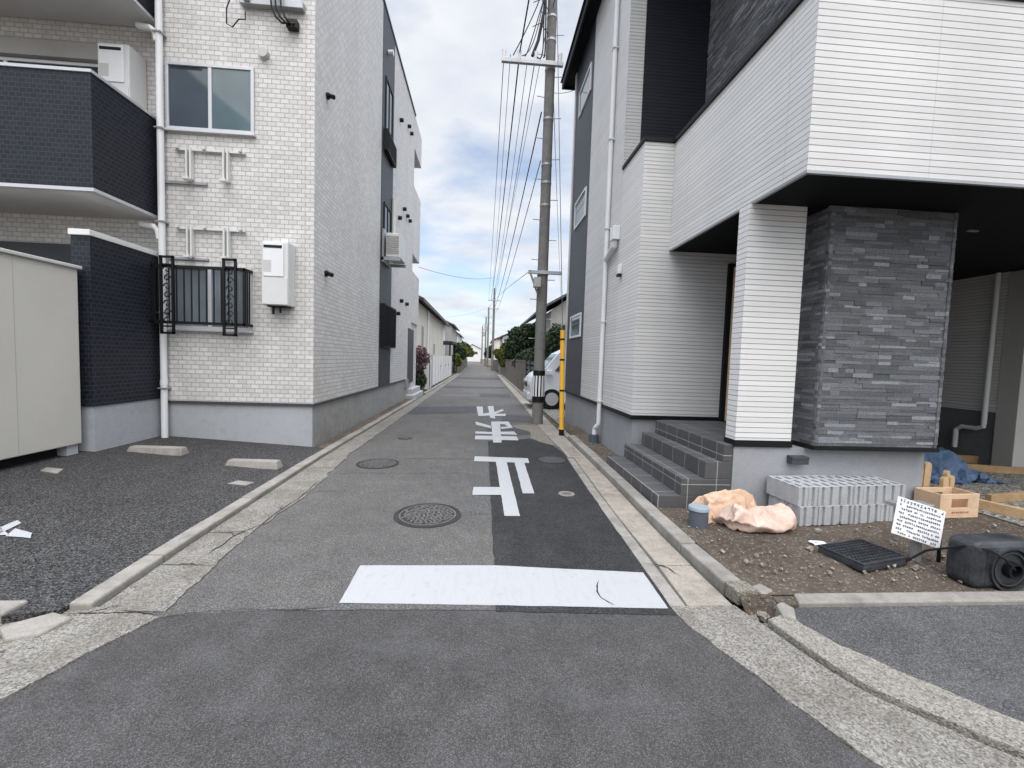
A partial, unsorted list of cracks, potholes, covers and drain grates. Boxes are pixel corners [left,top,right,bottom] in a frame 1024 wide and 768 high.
manhole cover [536,456,568,464]
manhole cover [393,503,461,528]
crack [169,483,320,565]
manhole cover [356,458,399,469]
